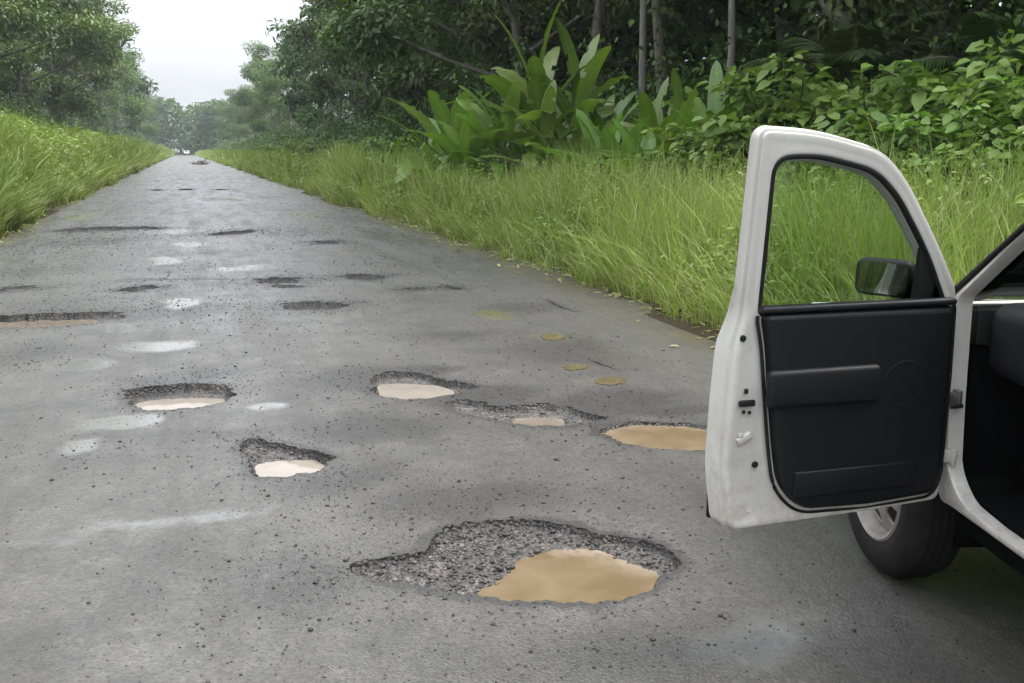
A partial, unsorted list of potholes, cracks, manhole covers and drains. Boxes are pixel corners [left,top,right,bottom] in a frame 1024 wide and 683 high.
pothole [123,383,237,410]
pothole [281,301,351,310]
pothole [346,518,682,604]
pothole [0,311,126,328]
pothole [238,438,336,477]
pothole [599,421,707,451]
pothole [369,371,479,399]
pothole [444,399,607,426]
